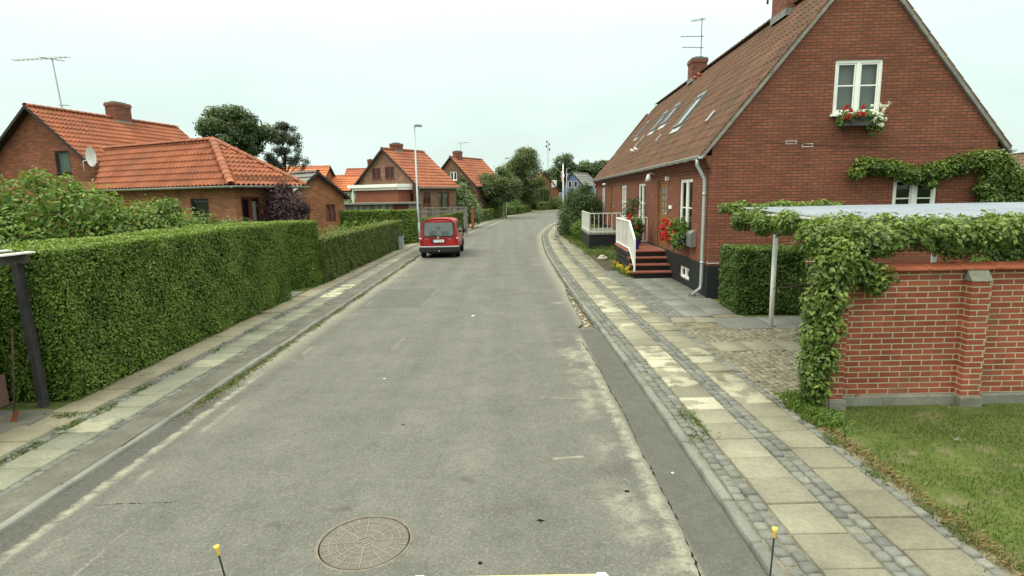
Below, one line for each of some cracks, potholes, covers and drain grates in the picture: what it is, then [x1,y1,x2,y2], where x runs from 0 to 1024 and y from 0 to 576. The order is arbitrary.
manhole cover [314,515,413,573]
